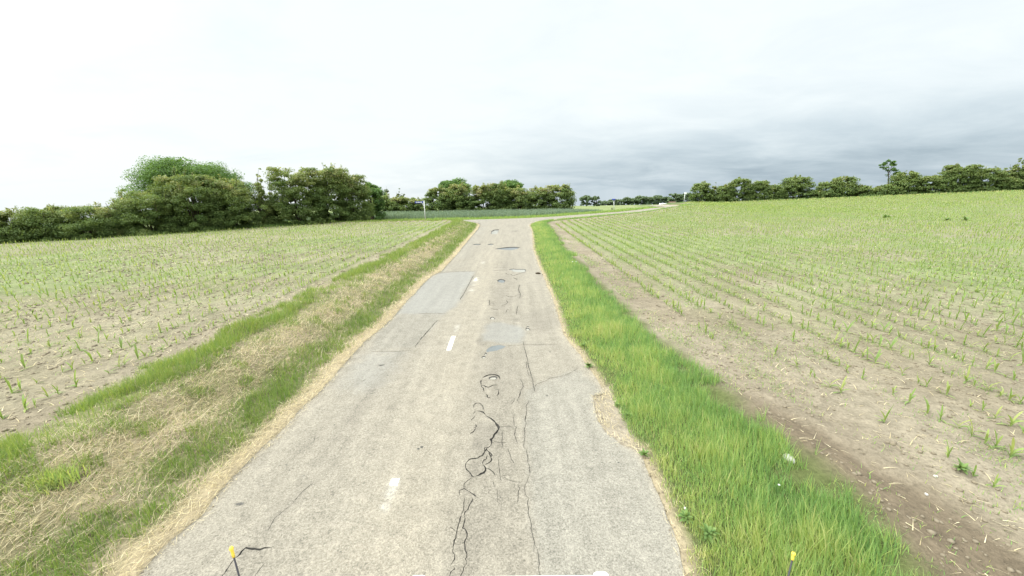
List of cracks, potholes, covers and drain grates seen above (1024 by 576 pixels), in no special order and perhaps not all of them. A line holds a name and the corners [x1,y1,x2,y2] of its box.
crack [222,547,272,576]
crack [449,343,578,576]
